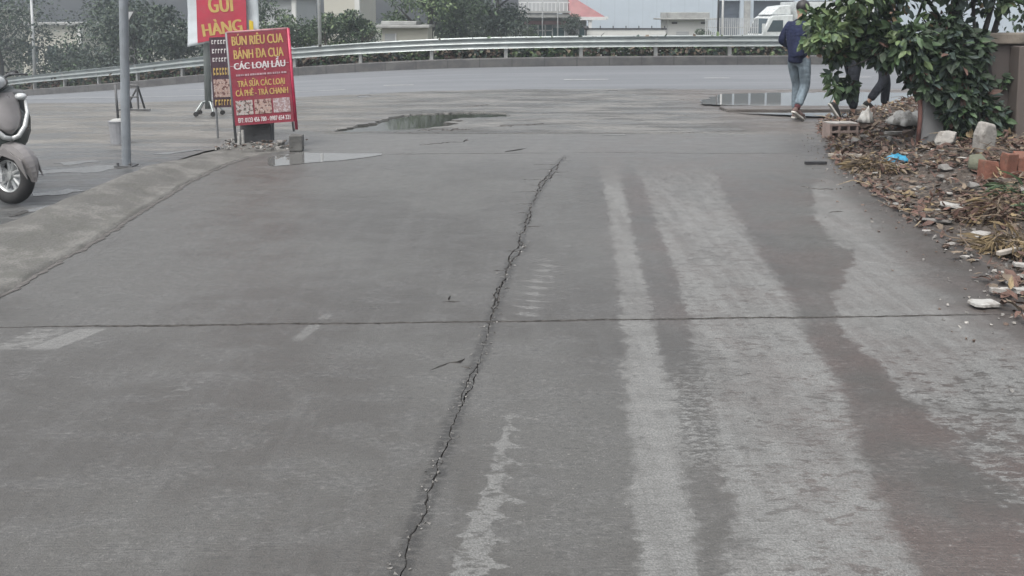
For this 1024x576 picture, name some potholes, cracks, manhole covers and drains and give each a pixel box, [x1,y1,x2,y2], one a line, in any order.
crack [387,157,565,576]
pothole [335,111,510,132]
